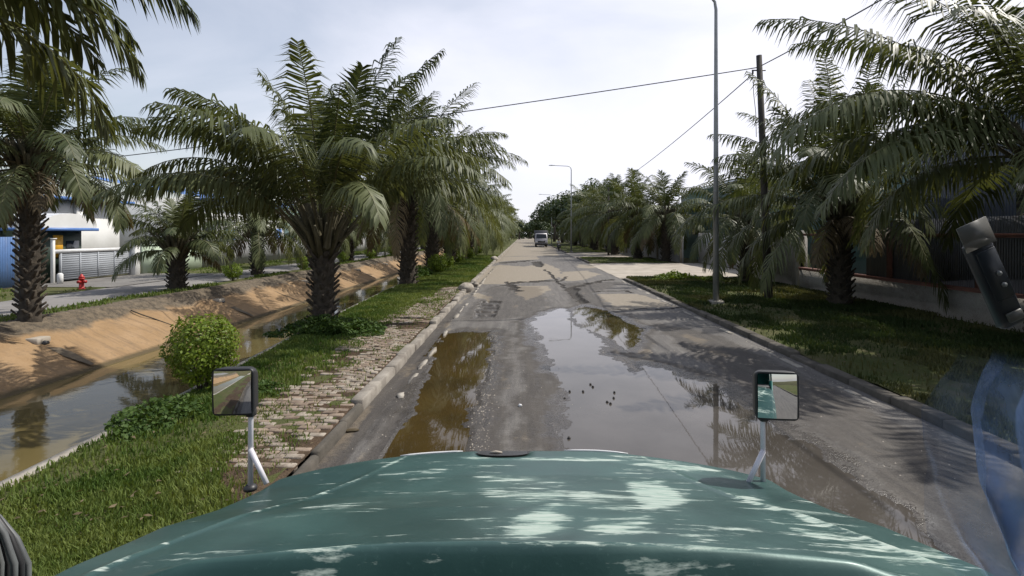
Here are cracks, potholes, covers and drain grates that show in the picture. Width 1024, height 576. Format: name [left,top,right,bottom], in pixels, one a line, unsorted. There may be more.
crack [499,260,682,310]
pothole [528,308,957,558]
pothole [378,331,497,459]
